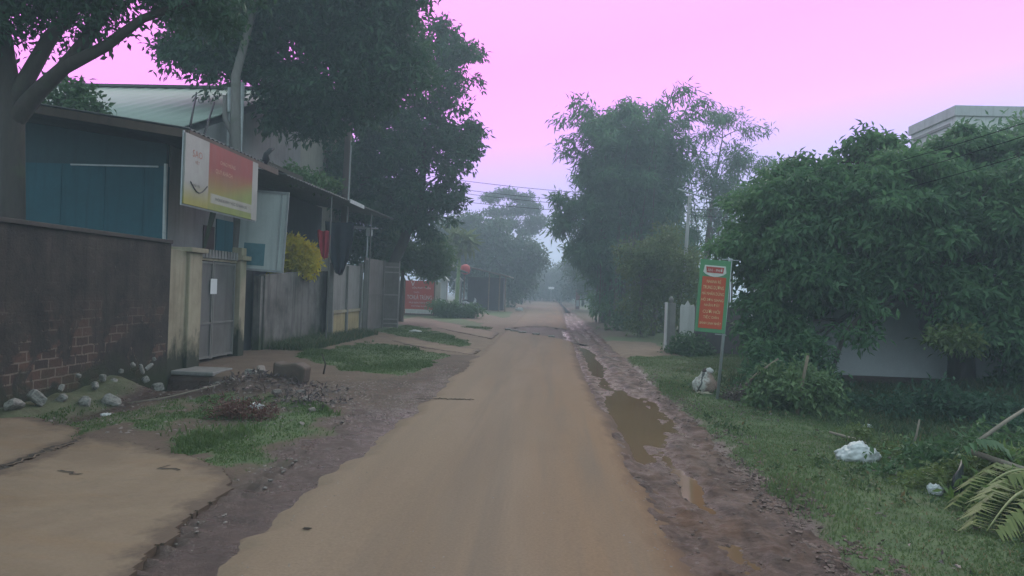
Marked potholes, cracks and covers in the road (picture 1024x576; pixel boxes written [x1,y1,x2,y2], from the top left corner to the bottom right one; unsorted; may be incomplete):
pothole [508,326,588,345]
